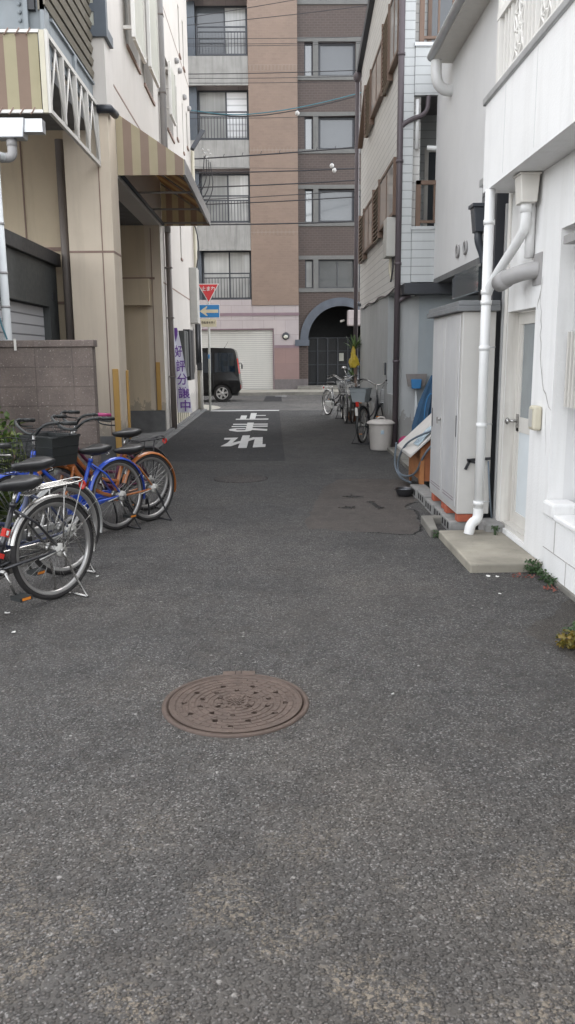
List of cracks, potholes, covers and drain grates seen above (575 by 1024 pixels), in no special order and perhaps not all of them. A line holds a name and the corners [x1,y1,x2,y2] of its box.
crack [367,502,423,535]
manhole cover [161,670,309,738]
